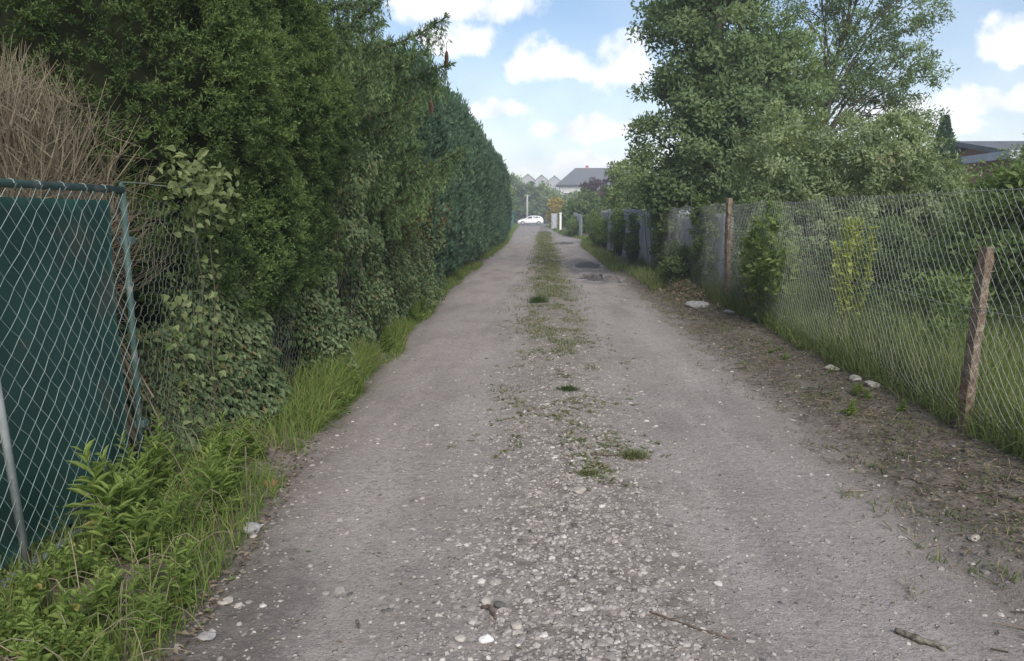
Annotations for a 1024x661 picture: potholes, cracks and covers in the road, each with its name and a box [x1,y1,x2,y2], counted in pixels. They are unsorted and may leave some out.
pothole [572,272,627,285]
pothole [572,260,604,270]
